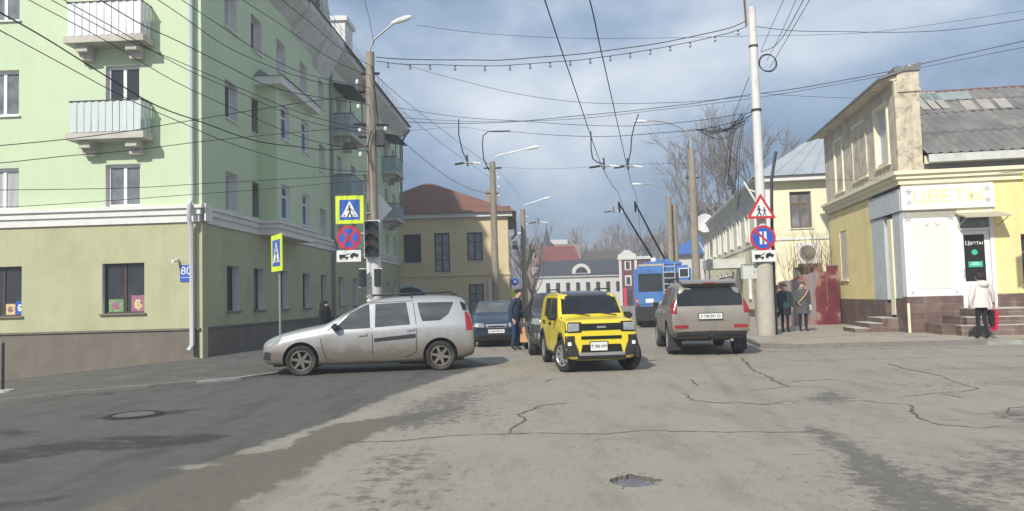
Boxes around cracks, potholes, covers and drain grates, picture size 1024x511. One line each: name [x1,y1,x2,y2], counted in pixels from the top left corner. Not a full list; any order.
manhole cover [102,410,165,420]
crack [683,358,834,404]
crack [839,364,1024,428]
crack [355,402,763,442]
pothole [605,473,662,489]
